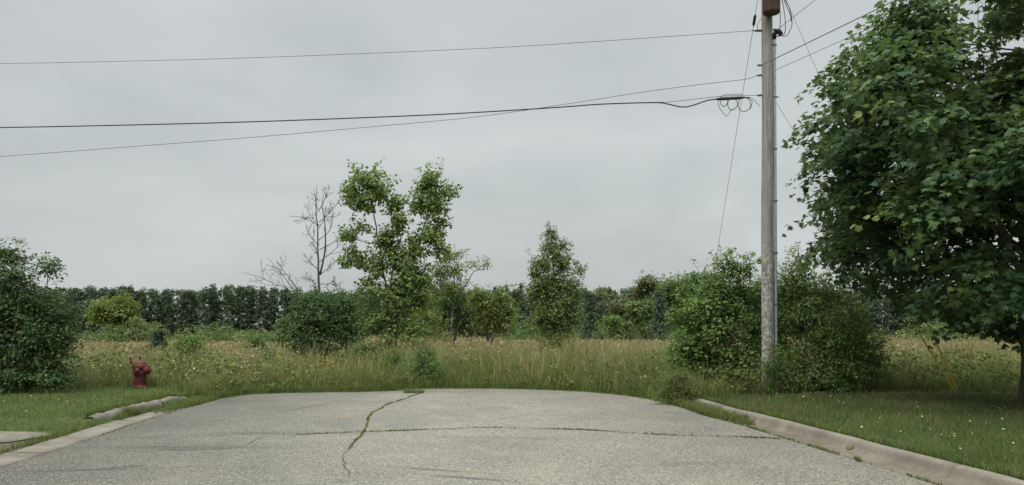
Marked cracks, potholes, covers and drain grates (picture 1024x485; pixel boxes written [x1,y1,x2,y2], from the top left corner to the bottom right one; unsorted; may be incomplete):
crack [106,393,780,476]
